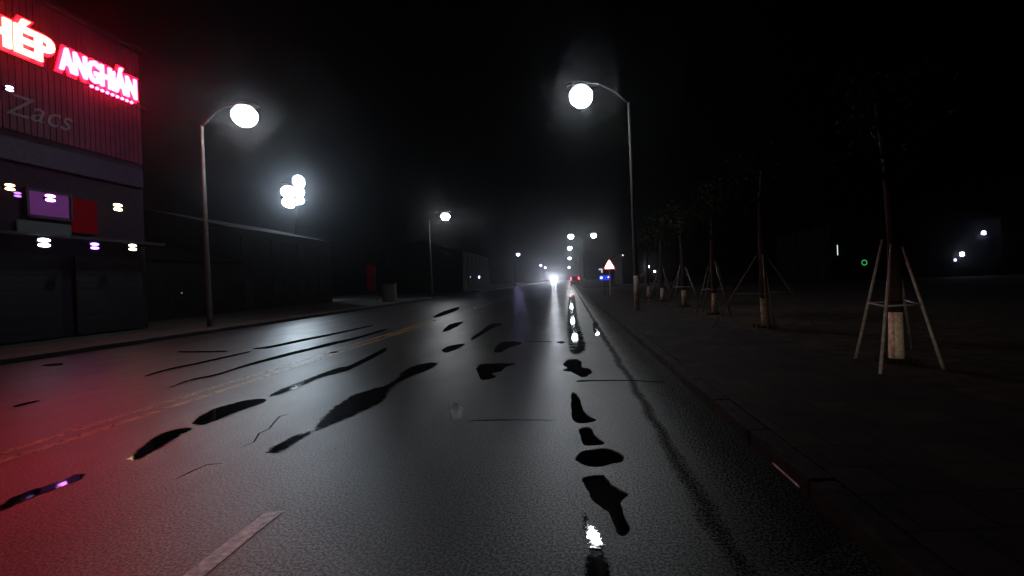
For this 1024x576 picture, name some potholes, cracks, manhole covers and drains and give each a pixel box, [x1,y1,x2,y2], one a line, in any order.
pothole [579,427,605,446]
pothole [575,448,624,467]
crack [241,415,284,448]
pothole [494,341,522,353]
pothole [476,363,516,380]
pothole [571,392,596,423]
pothole [563,359,592,377]
pothole [582,475,630,536]
